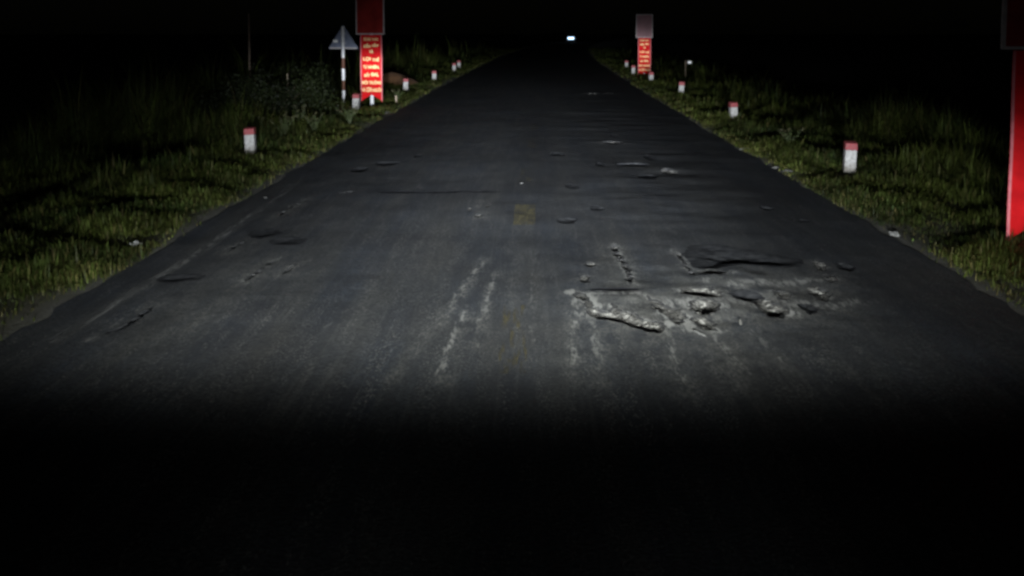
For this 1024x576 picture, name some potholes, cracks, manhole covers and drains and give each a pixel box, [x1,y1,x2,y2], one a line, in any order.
pothole [689,316,718,331]
pothole [153,273,206,283]
pothole [681,244,804,270]
pothole [806,285,834,302]
pothole [646,295,688,325]
pothole [269,236,308,245]
crack [227,240,298,282]
pothole [572,291,667,334]
pothole [751,299,790,318]
pothole [727,289,765,303]
pothole [688,299,721,316]
